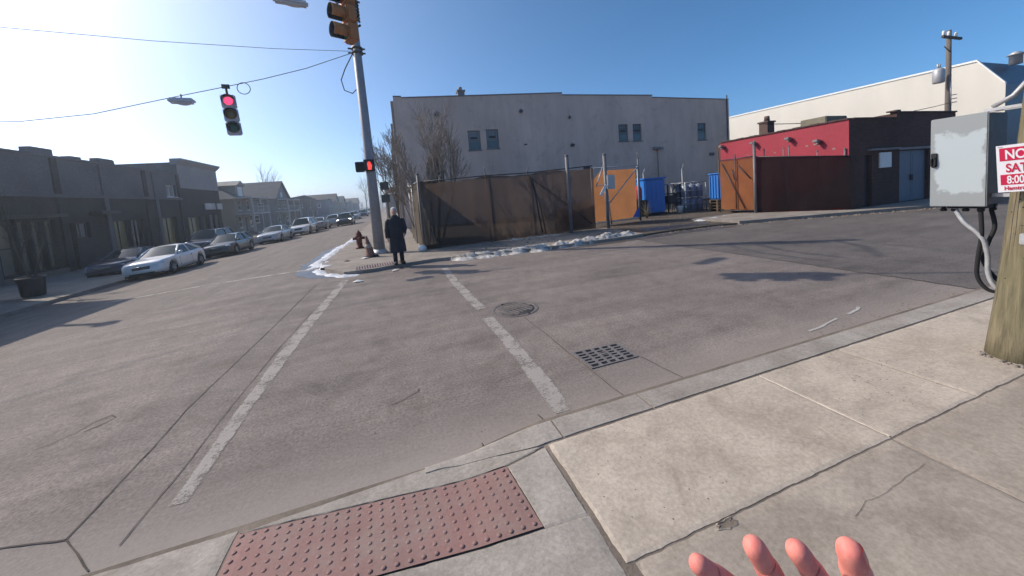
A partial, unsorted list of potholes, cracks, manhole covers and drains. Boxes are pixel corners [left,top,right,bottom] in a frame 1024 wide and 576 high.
manhole cover [492,301,538,317]
drain grate [571,343,638,369]
